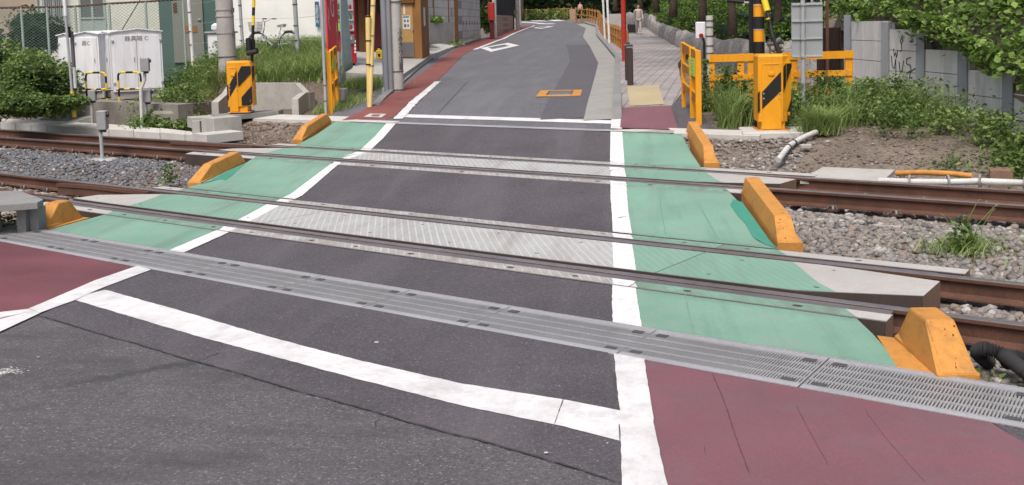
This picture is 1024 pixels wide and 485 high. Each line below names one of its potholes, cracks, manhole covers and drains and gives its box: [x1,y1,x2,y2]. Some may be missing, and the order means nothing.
drain grate [617,330,829,388]
drain grate [799,358,1024,428]
crack [713,375,749,473]
